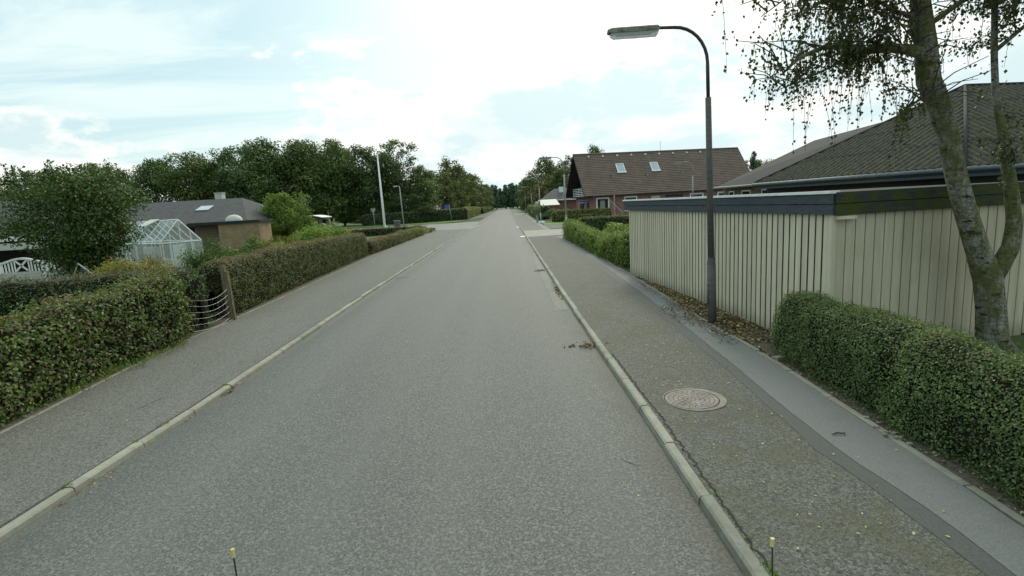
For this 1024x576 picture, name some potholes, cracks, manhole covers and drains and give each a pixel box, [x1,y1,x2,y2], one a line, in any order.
crack [611,353,776,576]
manhole cover [663,388,727,411]
